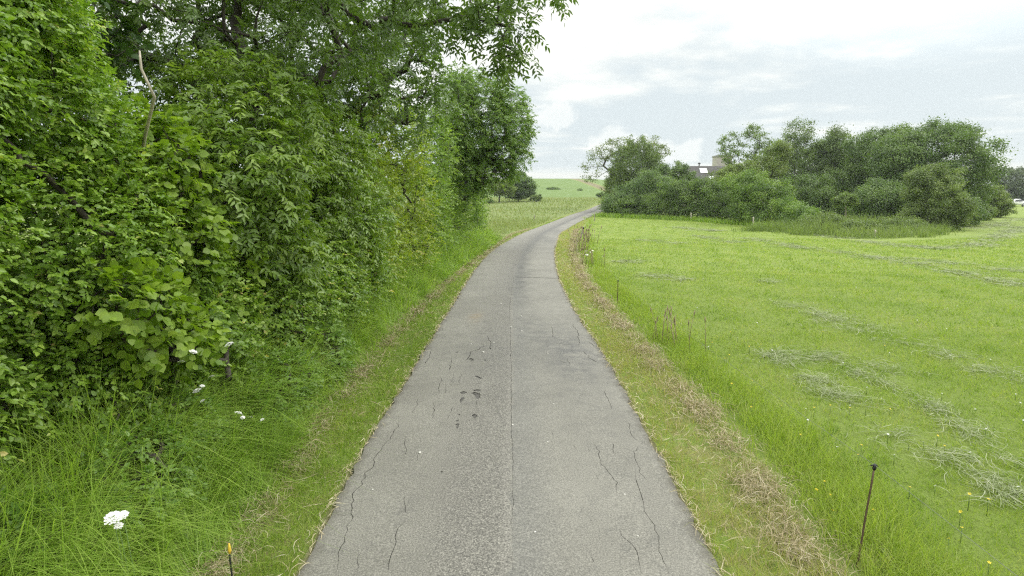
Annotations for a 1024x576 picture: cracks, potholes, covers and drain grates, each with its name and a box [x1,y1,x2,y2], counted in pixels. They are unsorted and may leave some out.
crack [573,424,664,562]
crack [336,333,491,572]
